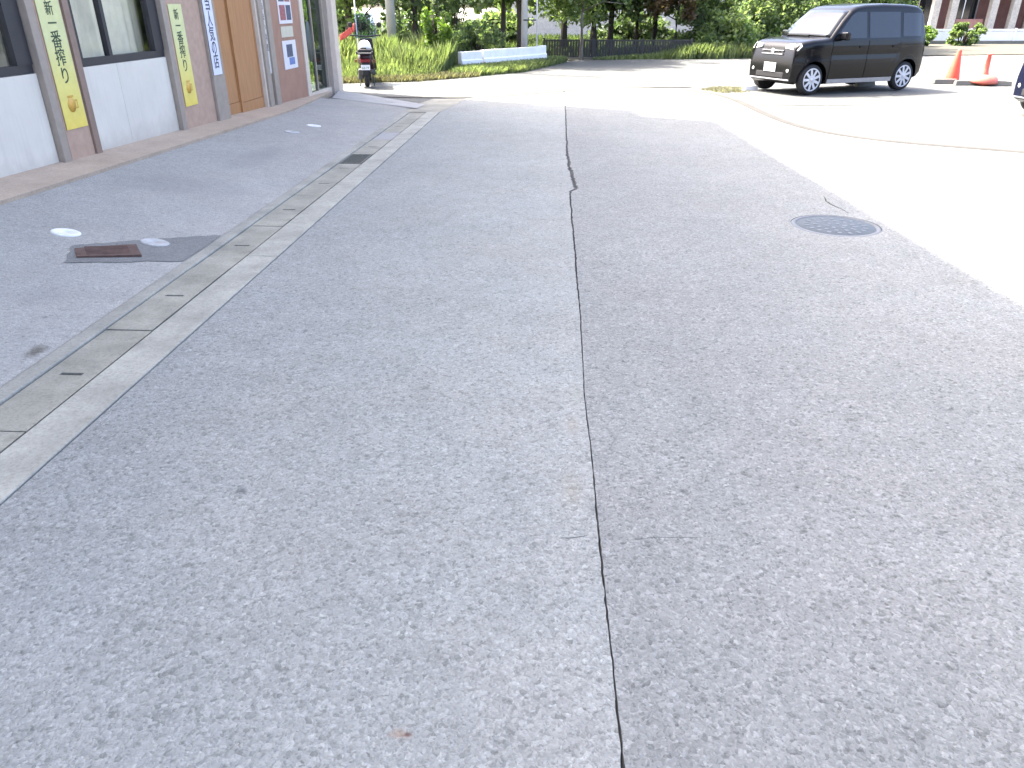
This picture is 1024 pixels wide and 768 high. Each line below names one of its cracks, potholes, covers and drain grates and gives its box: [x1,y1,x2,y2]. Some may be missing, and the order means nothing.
drain grate [339,154,373,164]
manhole cover [791,215,882,237]
crack [564,94,705,768]
